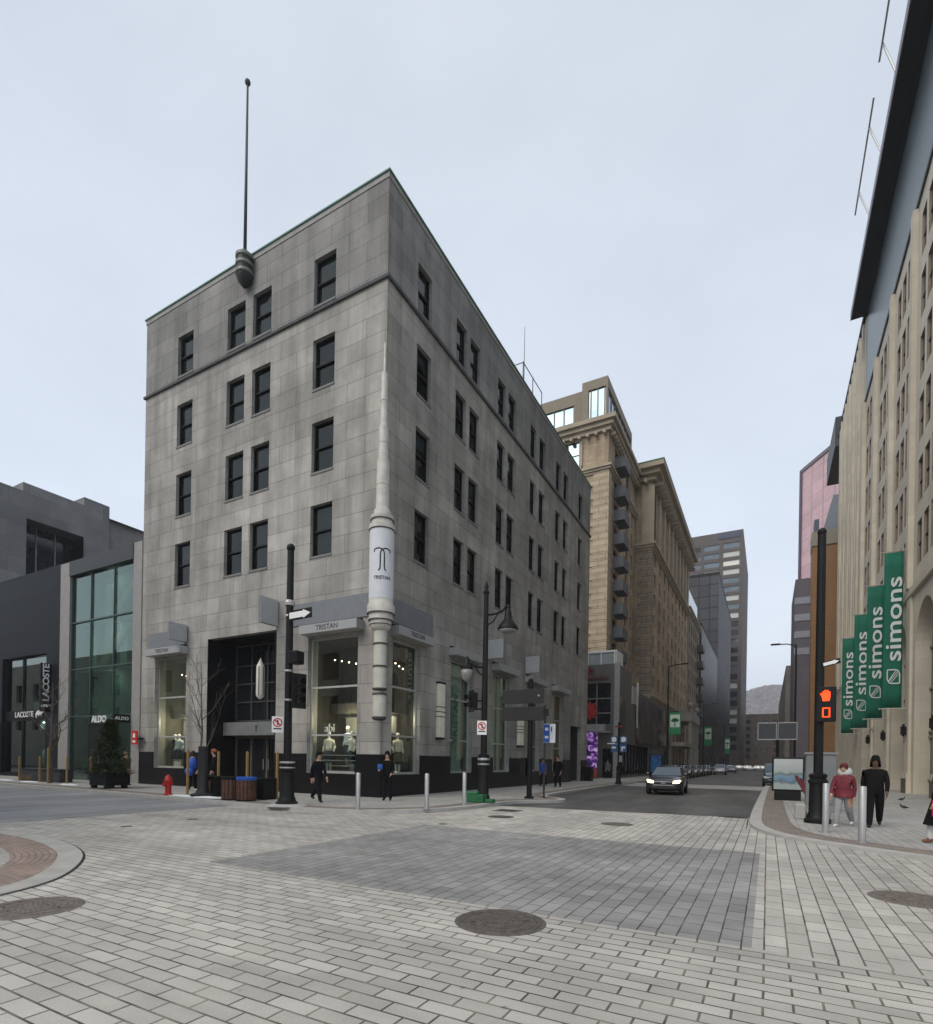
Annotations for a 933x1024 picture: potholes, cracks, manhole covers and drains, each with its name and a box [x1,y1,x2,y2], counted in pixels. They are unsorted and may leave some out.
manhole cover [455,909,546,936]
manhole cover [0,896,86,921]
manhole cover [867,890,933,909]
